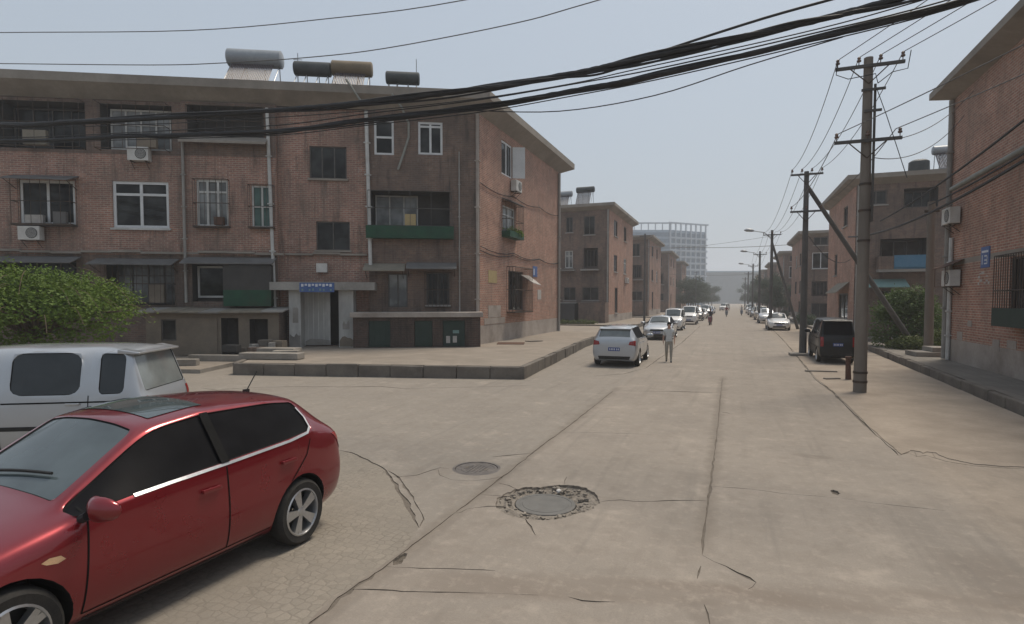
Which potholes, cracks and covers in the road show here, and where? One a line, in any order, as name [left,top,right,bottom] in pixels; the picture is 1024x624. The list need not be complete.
manhole cover [515,494,576,516]
crack [602,379,943,589]
crack [773,330,1024,469]
crack [309,326,700,624]
